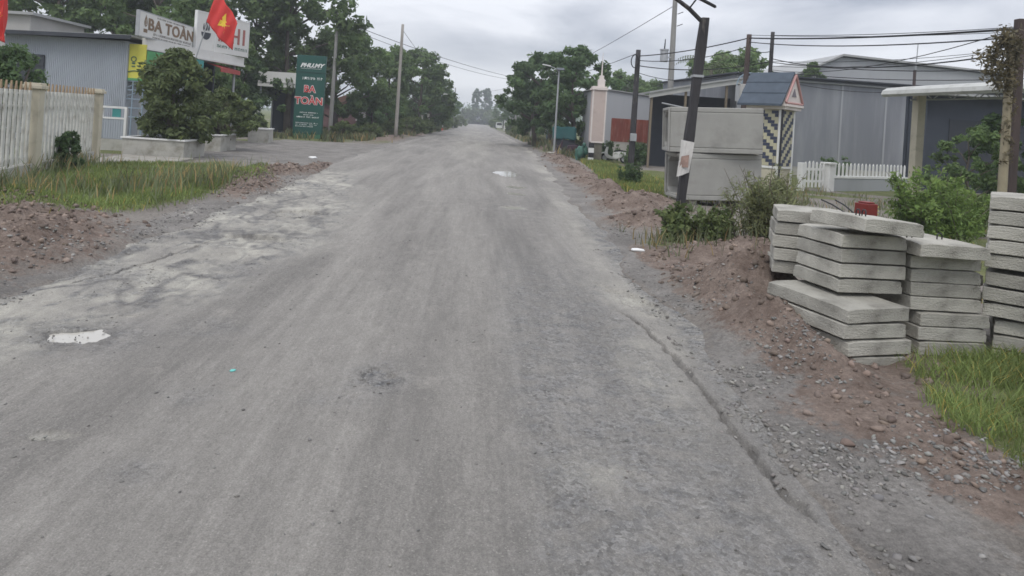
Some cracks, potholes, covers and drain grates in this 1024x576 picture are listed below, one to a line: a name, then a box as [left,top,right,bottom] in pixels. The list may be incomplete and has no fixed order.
pothole [487,170,527,179]
pothole [30,326,121,347]
crack [59,239,221,287]
pothole [347,362,406,392]
pothole [8,424,92,447]
crack [605,308,836,536]
